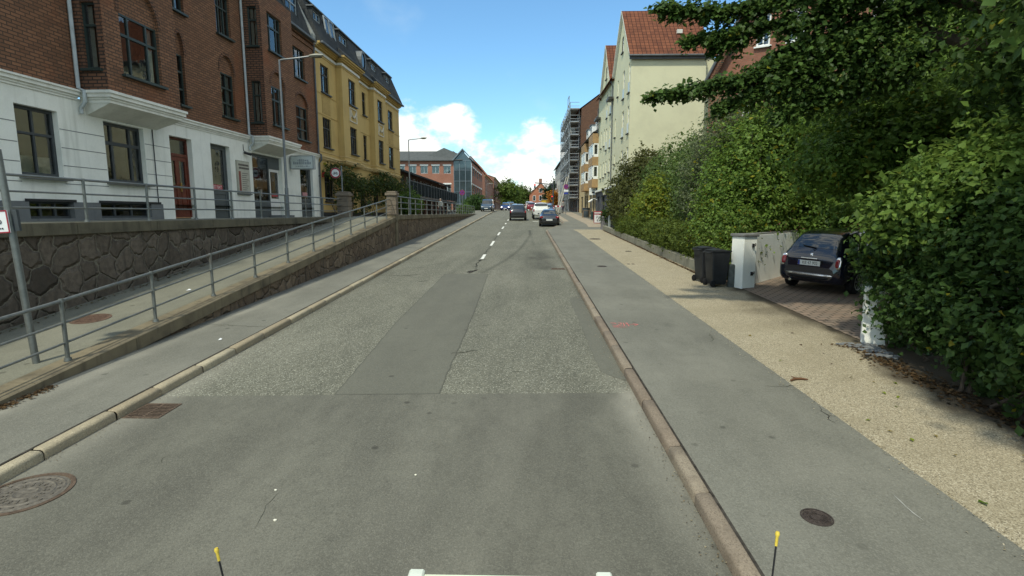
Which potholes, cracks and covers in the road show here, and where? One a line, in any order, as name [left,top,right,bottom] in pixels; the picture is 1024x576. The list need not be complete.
manhole cover [68,314,112,324]
manhole cover [800,508,834,527]
drain grate [122,403,182,419]
manhole cover [0,472,76,516]
